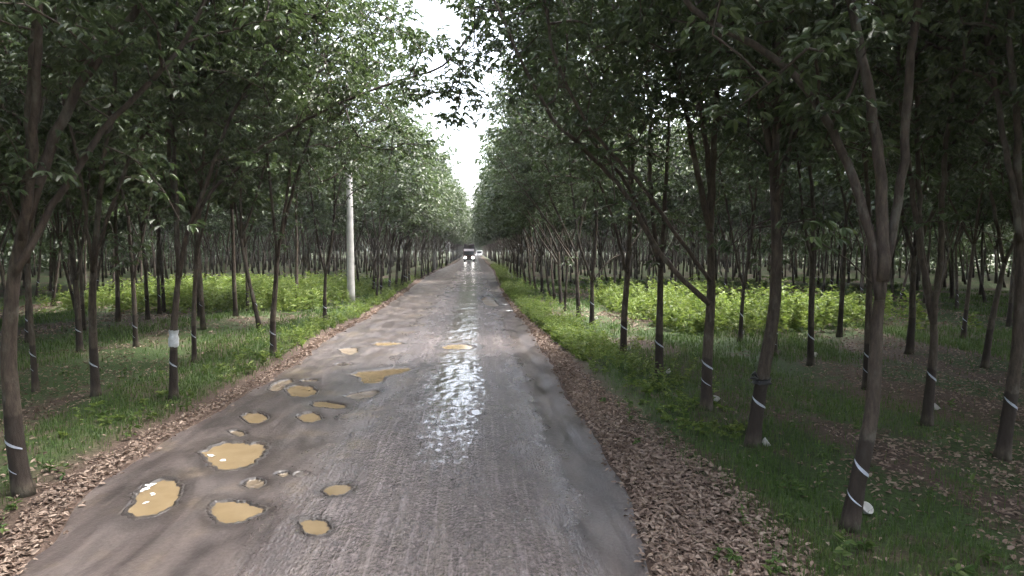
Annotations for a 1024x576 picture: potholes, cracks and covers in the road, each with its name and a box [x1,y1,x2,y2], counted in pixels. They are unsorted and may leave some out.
pothole [309,400,350,409]
pothole [297,517,334,536]
pothole [337,347,359,355]
pothole [342,389,382,400]
pothole [239,411,270,424]
